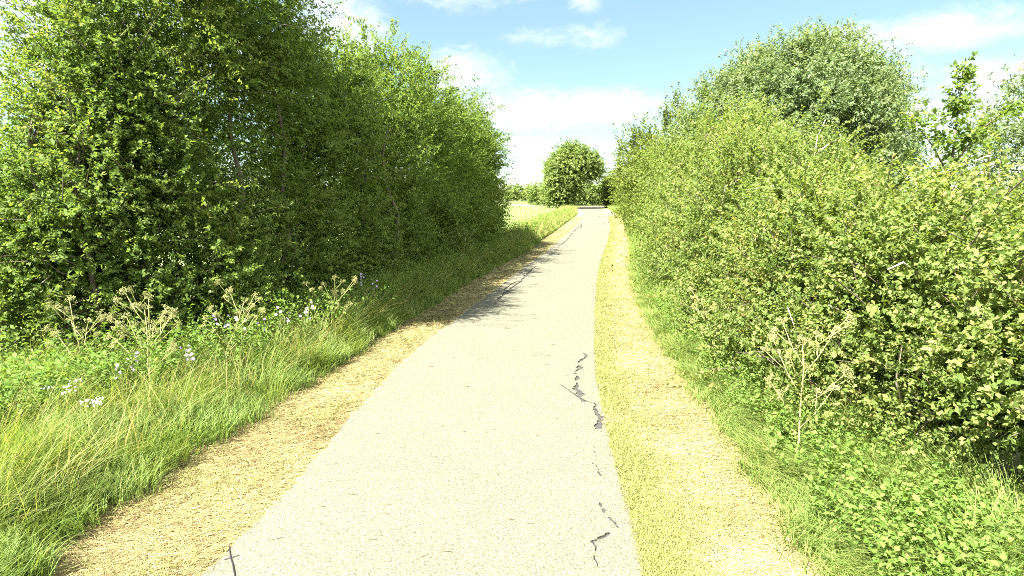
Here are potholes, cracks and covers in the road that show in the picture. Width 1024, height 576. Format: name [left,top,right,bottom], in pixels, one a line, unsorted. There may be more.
crack [497,224,582,300]
crack [590,502,619,566]
crack [560,353,604,432]
